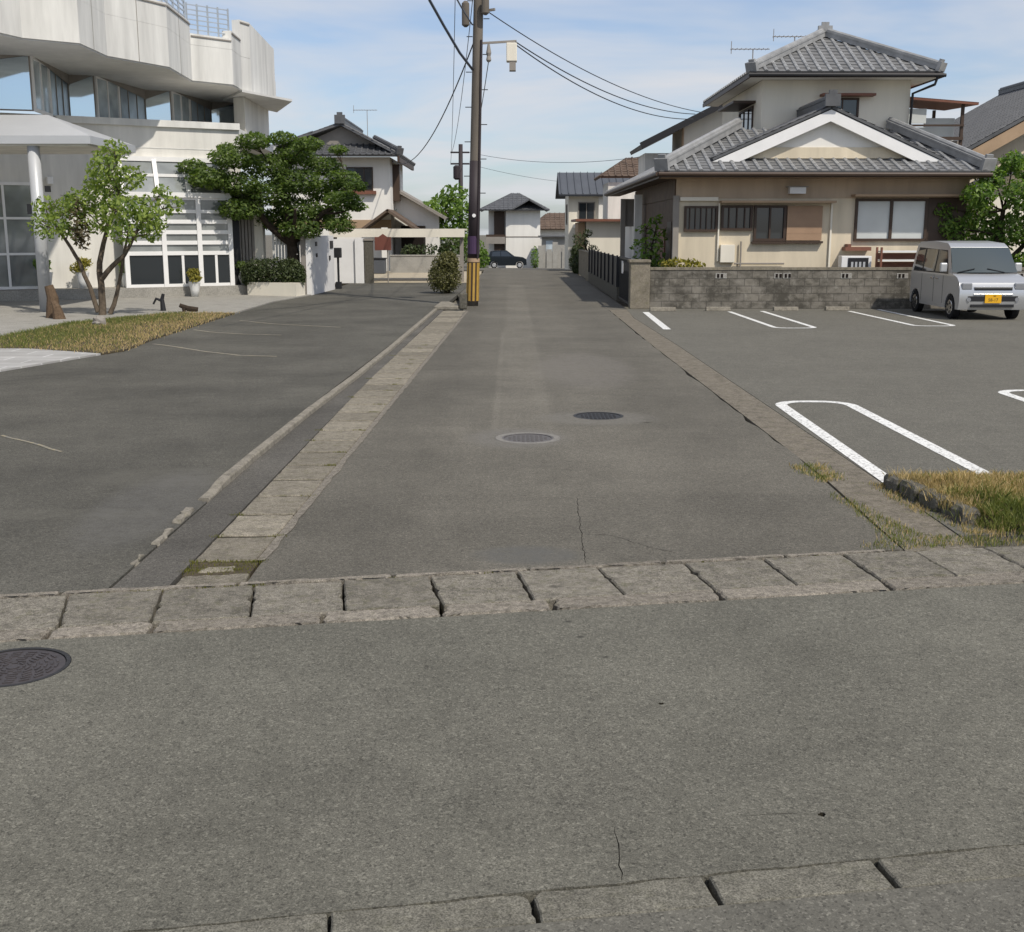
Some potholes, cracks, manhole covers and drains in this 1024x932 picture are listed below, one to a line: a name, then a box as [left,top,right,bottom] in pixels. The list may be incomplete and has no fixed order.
manhole cover [573,412,623,420]
manhole cover [495,432,560,444]
manhole cover [0,647,71,687]
crack [577,498,665,563]
